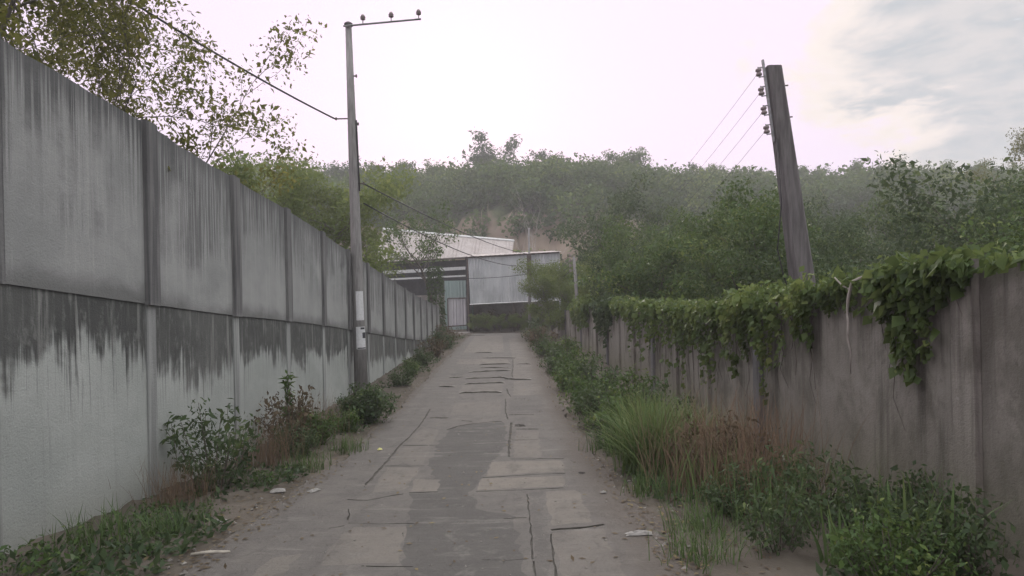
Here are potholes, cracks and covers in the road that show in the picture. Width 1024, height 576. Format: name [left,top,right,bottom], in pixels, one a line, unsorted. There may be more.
crack [333,335,531,528]
crack [483,458,603,576]
